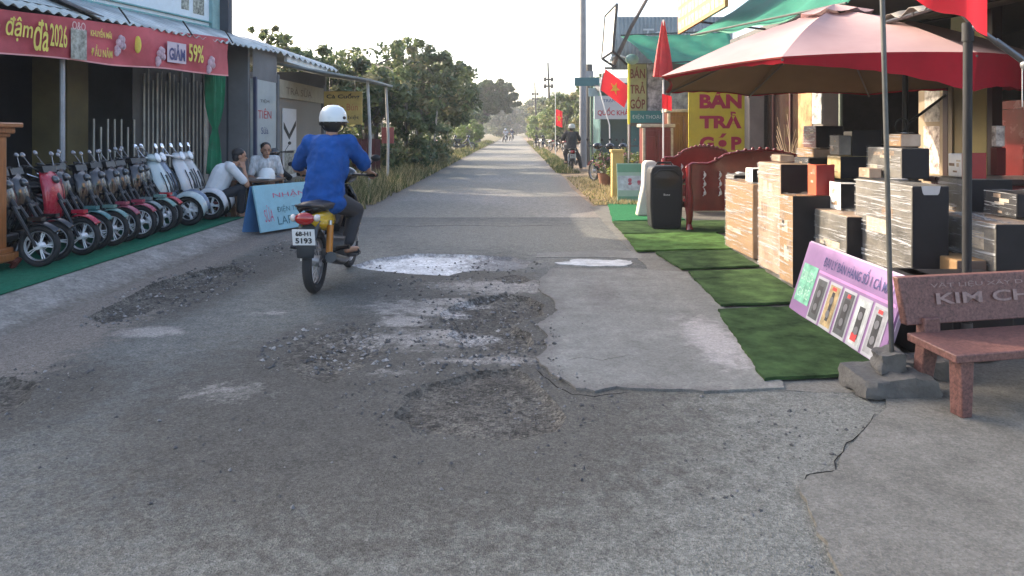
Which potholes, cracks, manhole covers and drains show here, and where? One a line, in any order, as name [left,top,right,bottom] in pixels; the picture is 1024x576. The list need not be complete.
pothole [88,265,245,324]
crack [804,415,874,480]
pothole [496,275,531,285]
pothole [439,294,545,352]
pothole [280,327,389,384]
crack [537,355,635,397]
pothole [393,368,566,441]
